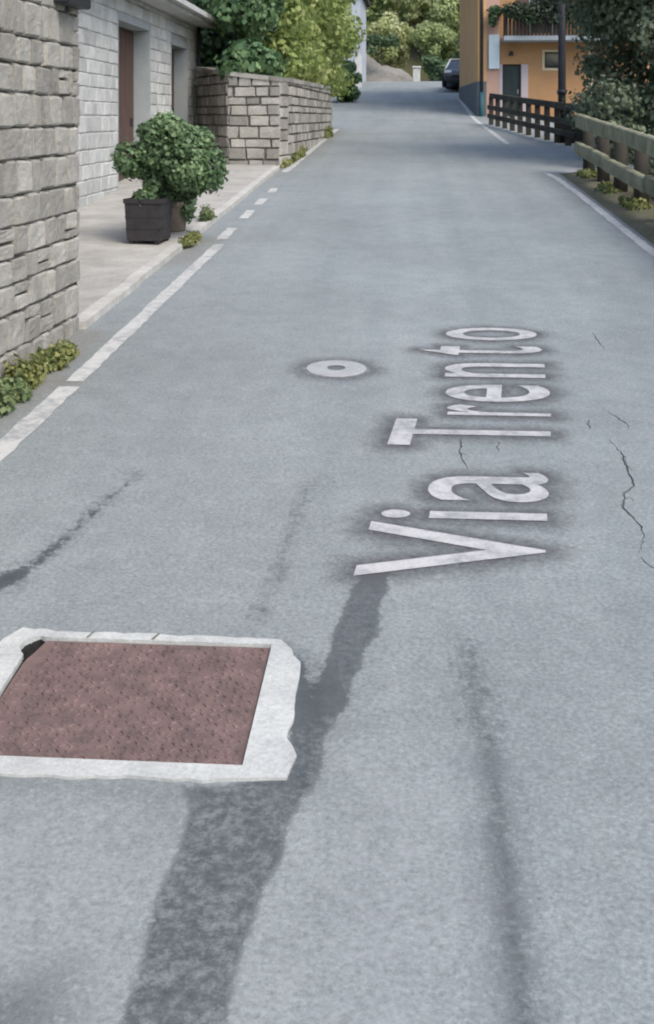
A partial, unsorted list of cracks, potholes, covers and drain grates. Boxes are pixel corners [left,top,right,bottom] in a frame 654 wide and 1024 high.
crack [609,413,653,568]
manhole cover [0,627,301,784]
